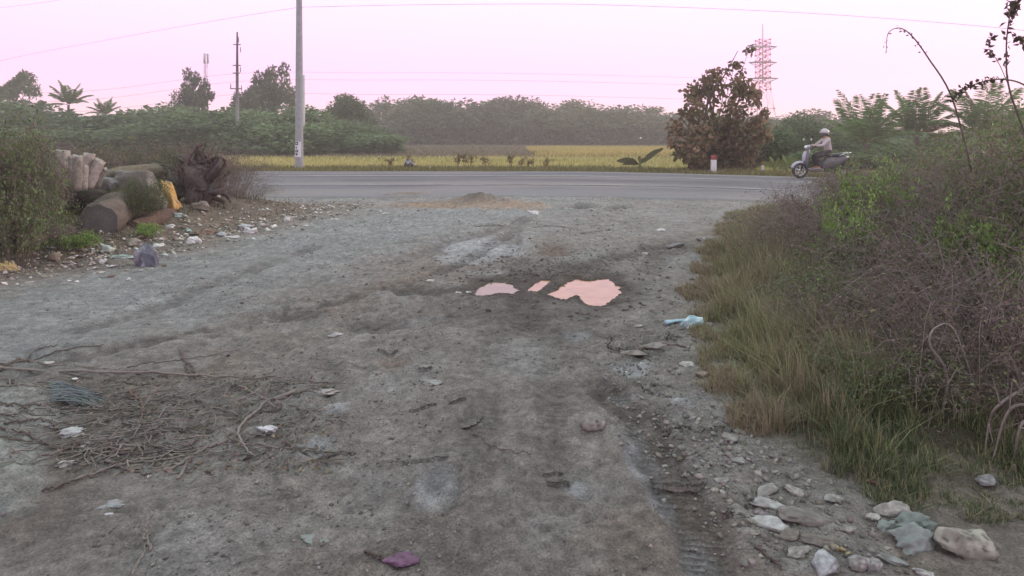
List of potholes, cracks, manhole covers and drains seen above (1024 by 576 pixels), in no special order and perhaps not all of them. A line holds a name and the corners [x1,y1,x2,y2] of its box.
pothole [538,275,631,307]
pothole [466,278,528,296]
pothole [521,277,559,292]
